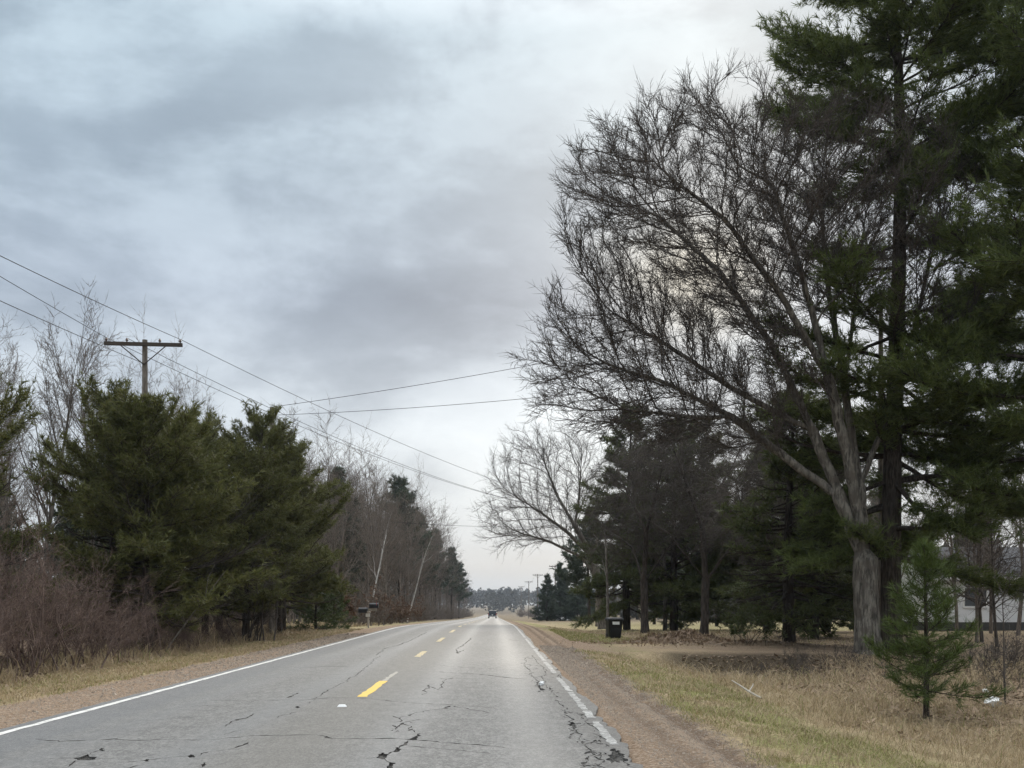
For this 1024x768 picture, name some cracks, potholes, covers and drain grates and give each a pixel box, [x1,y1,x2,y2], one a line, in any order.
crack [38,632,635,768]
